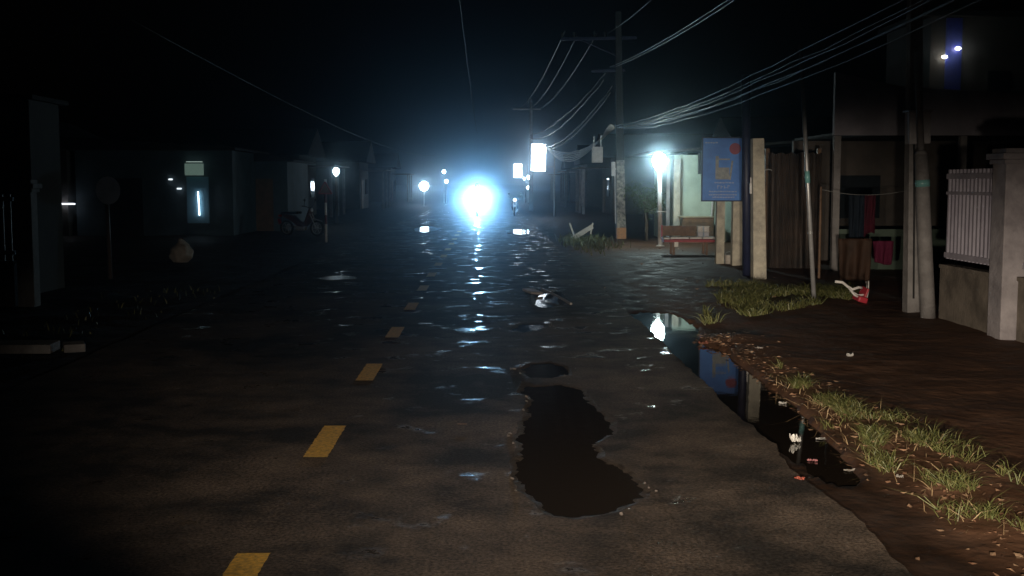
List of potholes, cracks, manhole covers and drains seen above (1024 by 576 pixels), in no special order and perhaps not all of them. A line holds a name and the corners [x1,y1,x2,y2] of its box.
pothole [510,361,576,378]
pothole [507,381,658,520]
